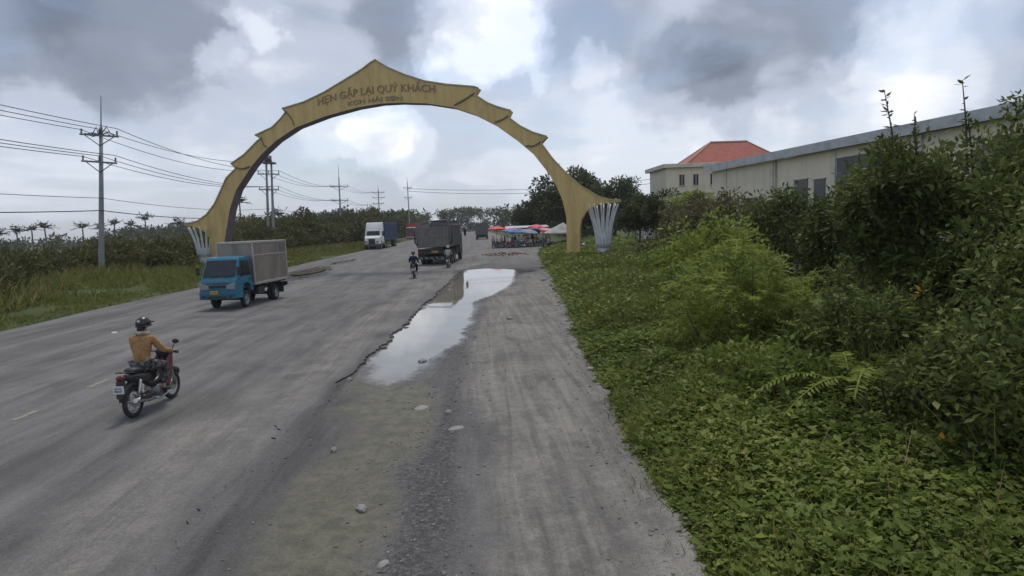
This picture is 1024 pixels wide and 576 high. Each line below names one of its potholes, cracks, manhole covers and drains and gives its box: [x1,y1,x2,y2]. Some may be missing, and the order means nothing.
pothole [352,267,544,392]
